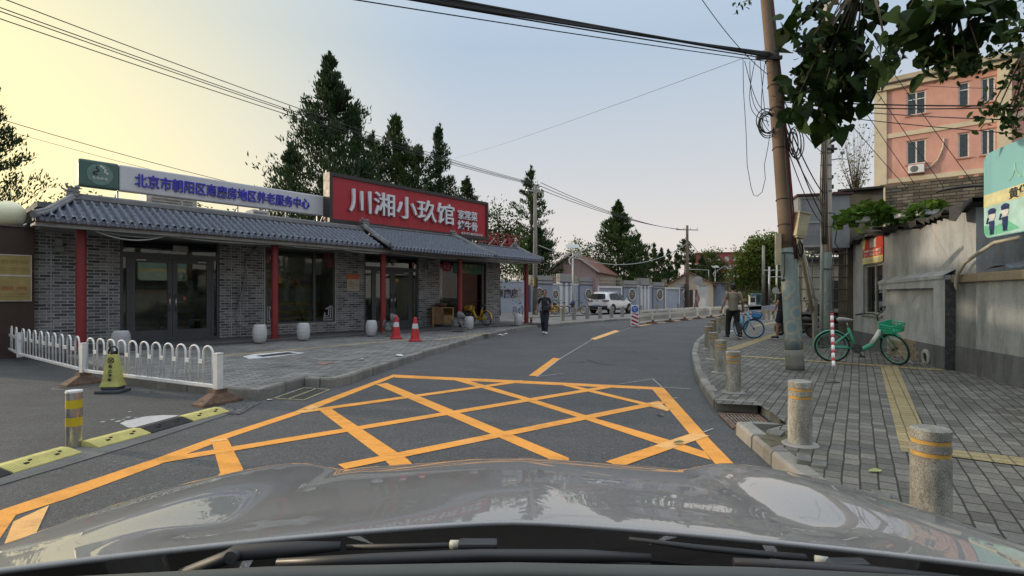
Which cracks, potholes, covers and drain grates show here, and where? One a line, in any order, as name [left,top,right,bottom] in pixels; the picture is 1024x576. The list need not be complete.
drain grate [718,413,767,430]
